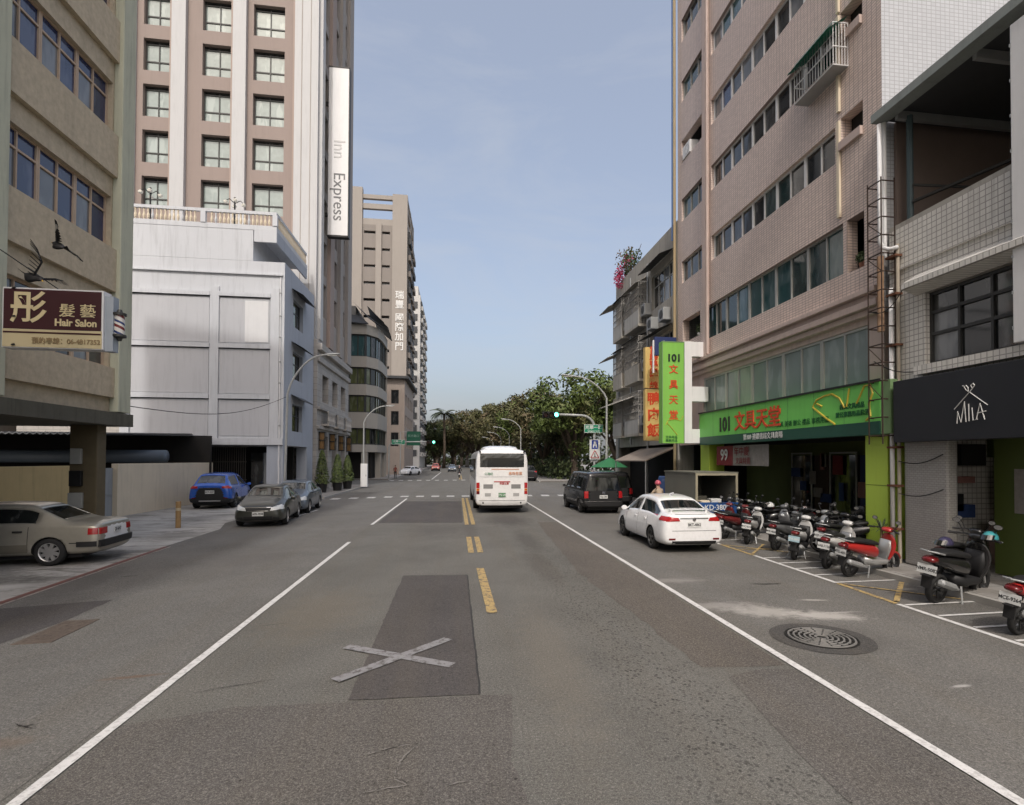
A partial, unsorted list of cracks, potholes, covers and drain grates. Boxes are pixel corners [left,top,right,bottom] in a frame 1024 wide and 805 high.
crack [362,743,472,793]
manhole cover [769,623,878,655]
